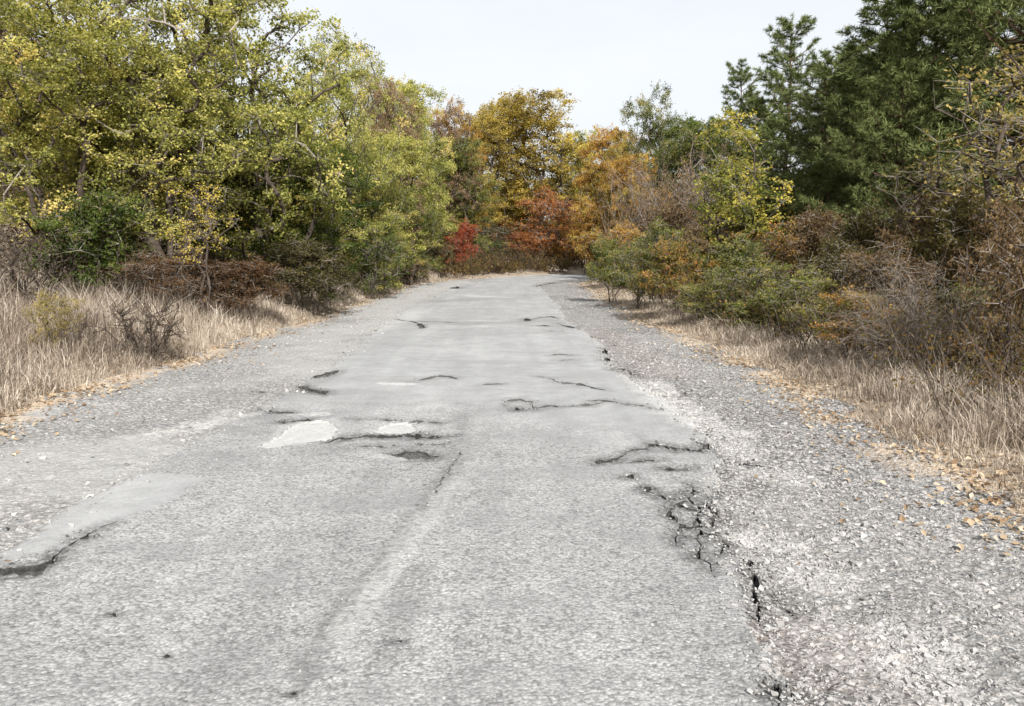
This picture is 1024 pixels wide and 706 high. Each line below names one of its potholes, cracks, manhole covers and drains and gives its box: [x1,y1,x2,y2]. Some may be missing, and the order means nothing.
crack [595,443,797,626]
pothole [391,451,439,460]
crack [250,391,463,507]
crack [483,354,661,410]
